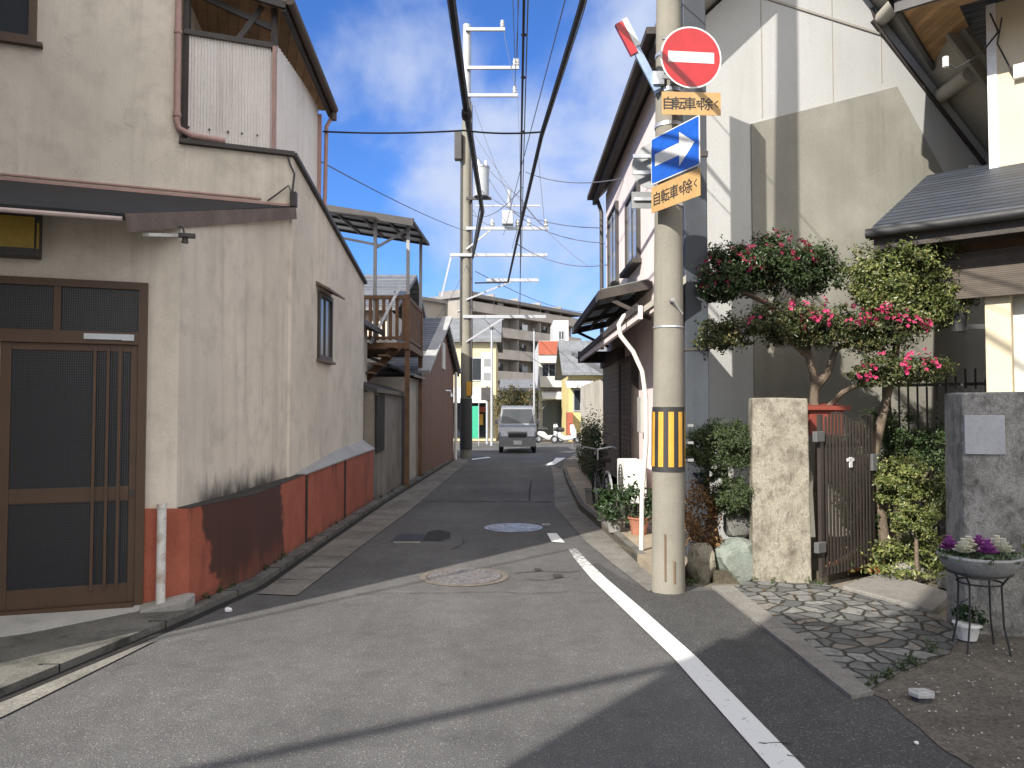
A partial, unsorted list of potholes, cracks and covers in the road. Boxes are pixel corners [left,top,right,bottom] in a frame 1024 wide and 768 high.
manhole cover [420,567,508,586]
utility cover [391,534,427,543]
manhole cover [484,523,543,532]
